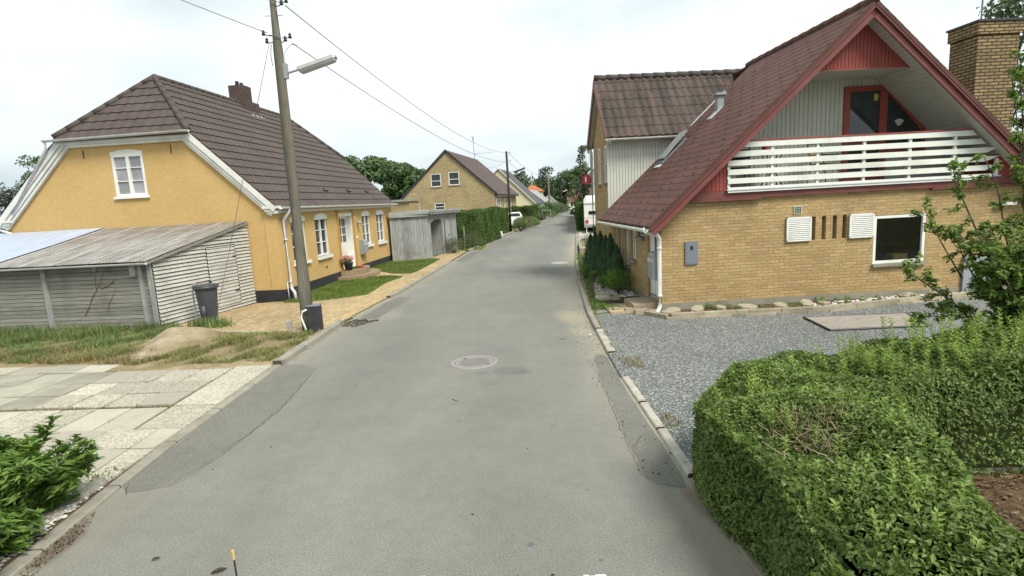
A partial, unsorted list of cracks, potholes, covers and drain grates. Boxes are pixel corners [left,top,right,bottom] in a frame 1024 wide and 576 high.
manhole cover [451,355,498,369]
